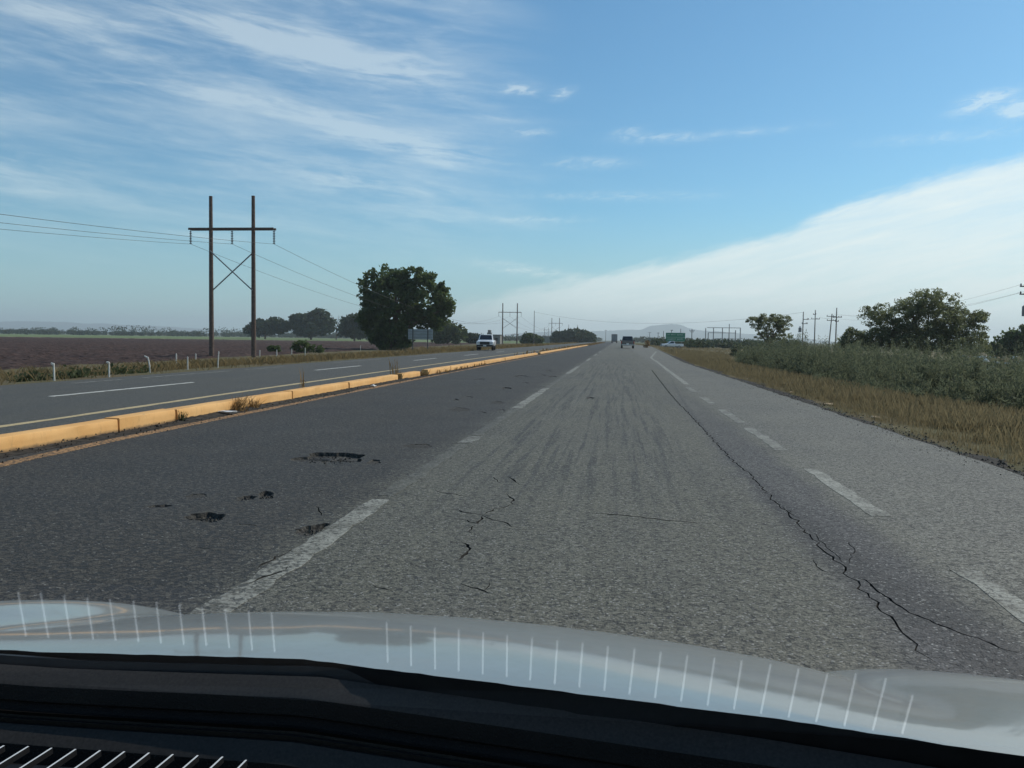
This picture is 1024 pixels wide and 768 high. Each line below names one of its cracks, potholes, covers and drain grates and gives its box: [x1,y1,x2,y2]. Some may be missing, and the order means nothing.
crack [651,370,1023,664]
pothole [295,523,330,536]
crack [441,477,525,560]
pothole [257,491,274,499]
pothole [290,452,365,465]
pothole [184,512,226,523]
